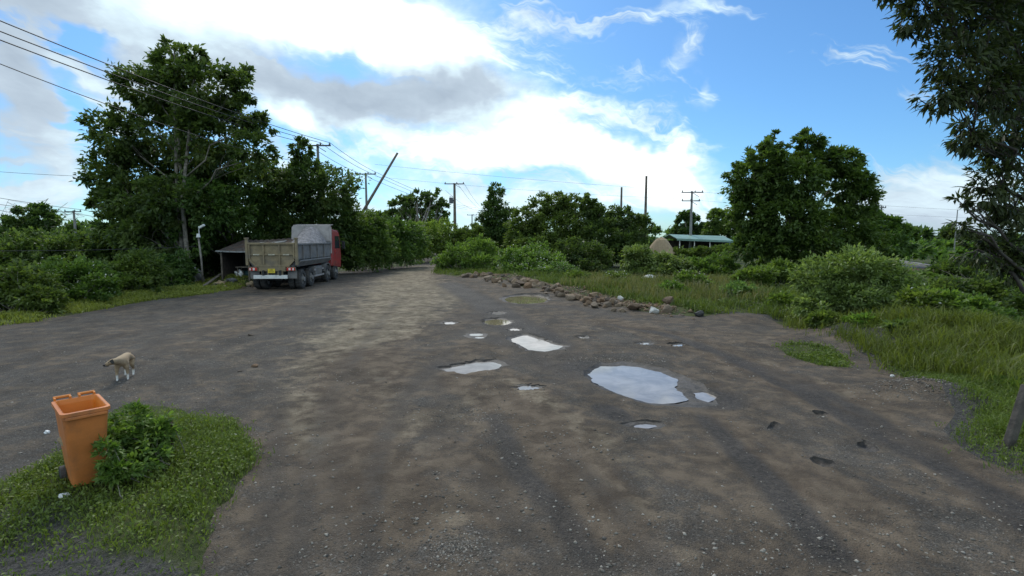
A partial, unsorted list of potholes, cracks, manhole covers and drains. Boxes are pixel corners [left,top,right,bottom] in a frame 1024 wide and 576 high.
pothole [809,456,836,467]
pothole [506,332,571,352]
pothole [437,358,508,374]
pothole [583,361,719,408]
pothole [857,439,880,452]
pothole [620,419,666,429]
pothole [480,317,515,325]
pothole [499,293,553,304]
